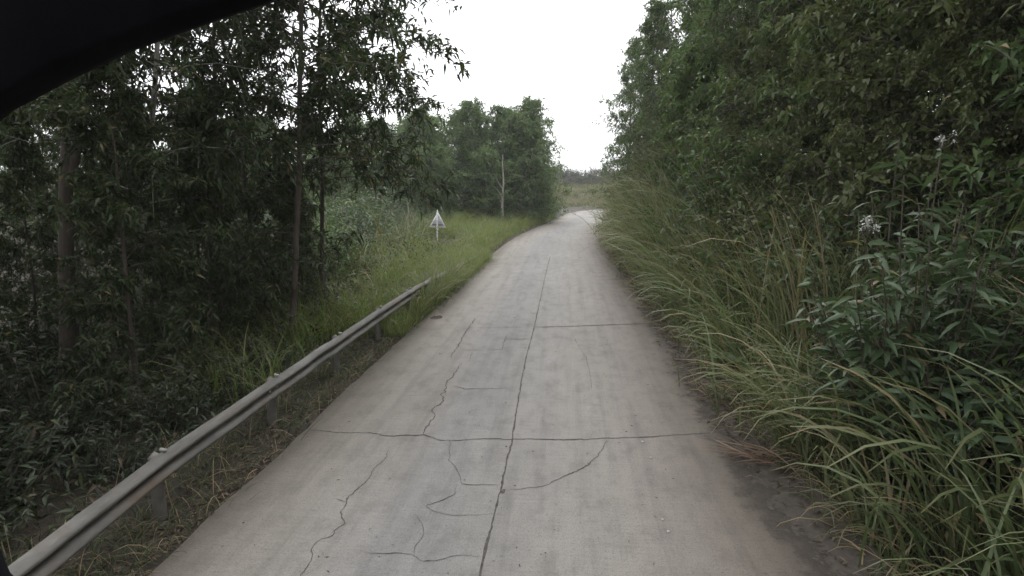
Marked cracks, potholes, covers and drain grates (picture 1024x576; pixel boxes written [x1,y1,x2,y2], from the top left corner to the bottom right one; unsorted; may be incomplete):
crack [379,441,607,561]
crack [300,452,388,576]
crack [407,319,506,433]
